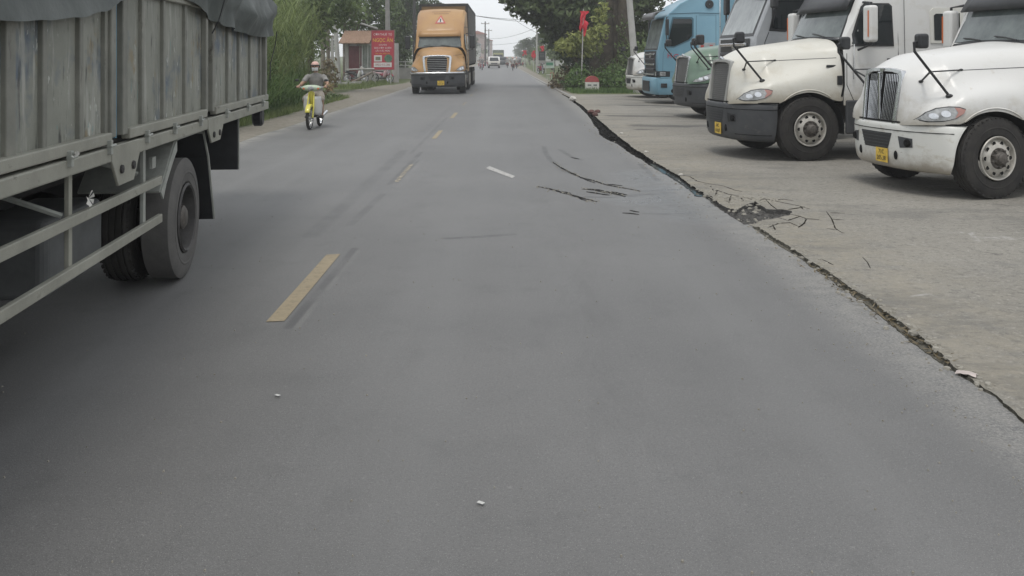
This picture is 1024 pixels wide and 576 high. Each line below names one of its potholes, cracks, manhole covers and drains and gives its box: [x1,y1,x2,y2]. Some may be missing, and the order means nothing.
pothole [706,195,792,227]
crack [538,94,1024,424]
